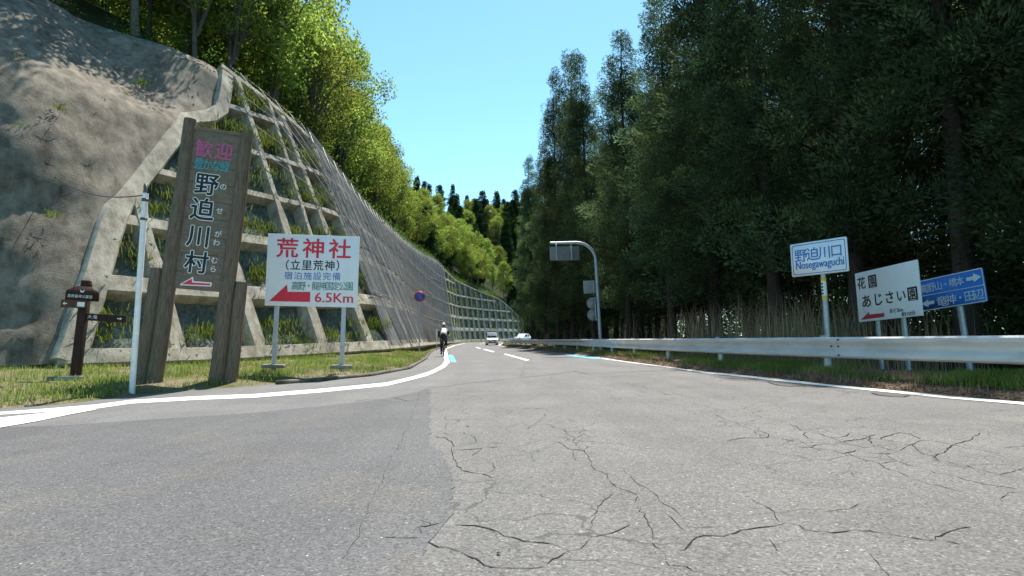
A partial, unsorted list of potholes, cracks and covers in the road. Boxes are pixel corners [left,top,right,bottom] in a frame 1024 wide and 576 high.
crack [383,411,972,575]
crack [717,405,1012,492]
